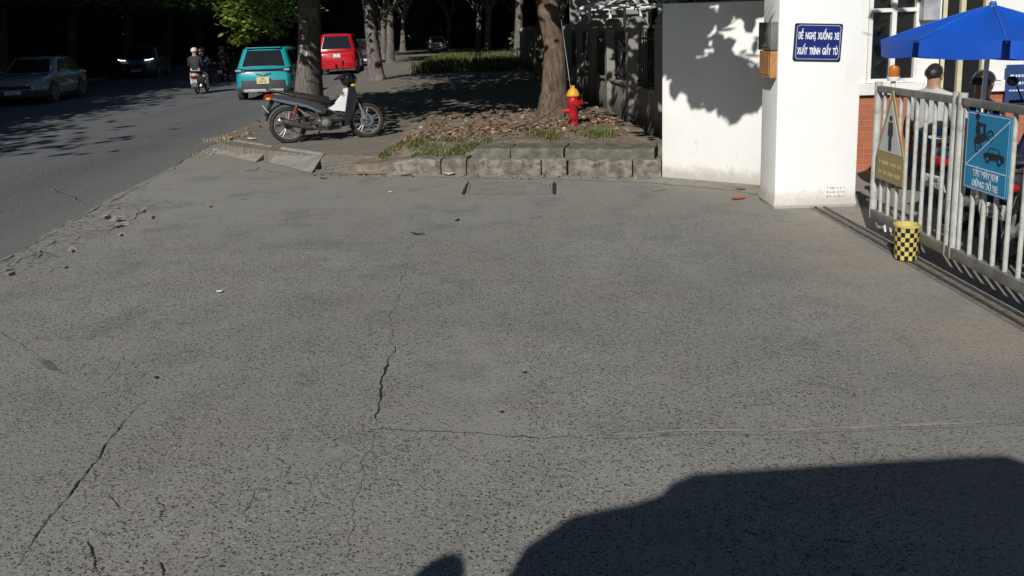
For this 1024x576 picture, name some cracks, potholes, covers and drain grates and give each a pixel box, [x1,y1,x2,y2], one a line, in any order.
crack [0,169,169,272]
crack [346,243,413,555]
